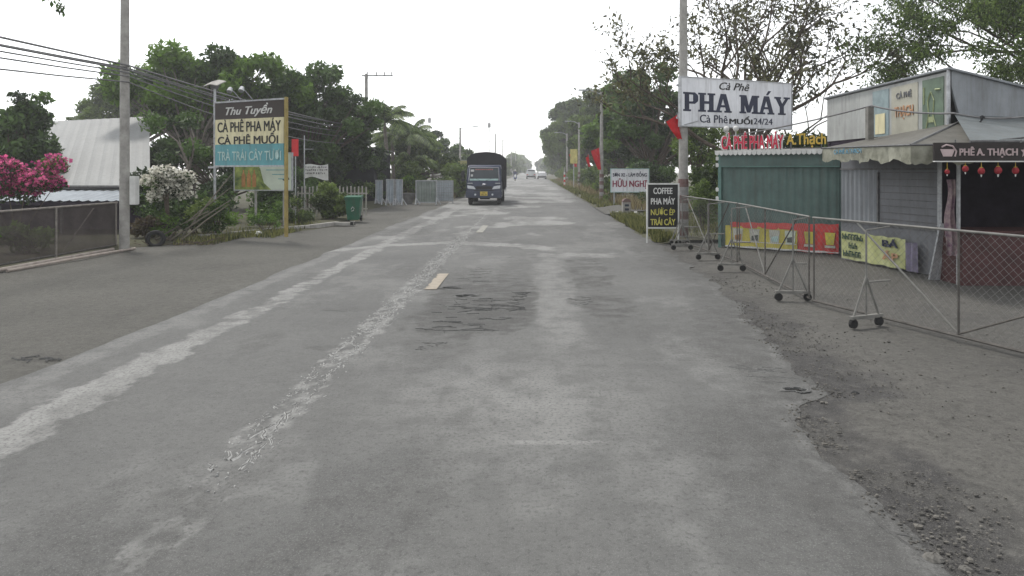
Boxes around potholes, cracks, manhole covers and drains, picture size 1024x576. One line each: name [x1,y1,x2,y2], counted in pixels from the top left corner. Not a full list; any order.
crack [11,355,62,363]
